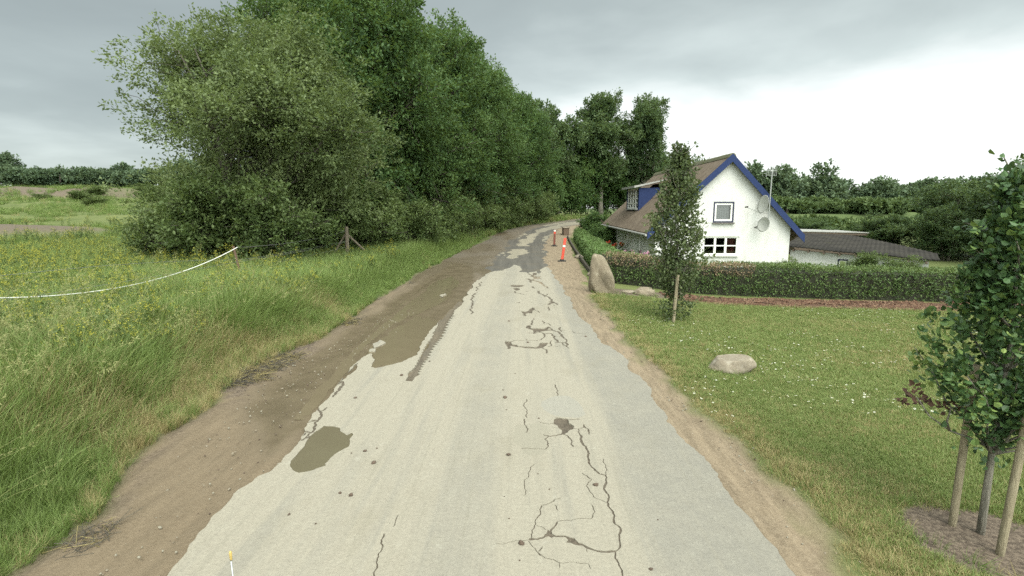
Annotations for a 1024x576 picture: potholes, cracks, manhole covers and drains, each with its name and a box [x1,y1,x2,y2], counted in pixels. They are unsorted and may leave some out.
crack [498,273,587,353]
crack [301,371,349,441]
crack [497,399,623,576]
crack [373,516,398,576]
pothole [553,417,574,435]
